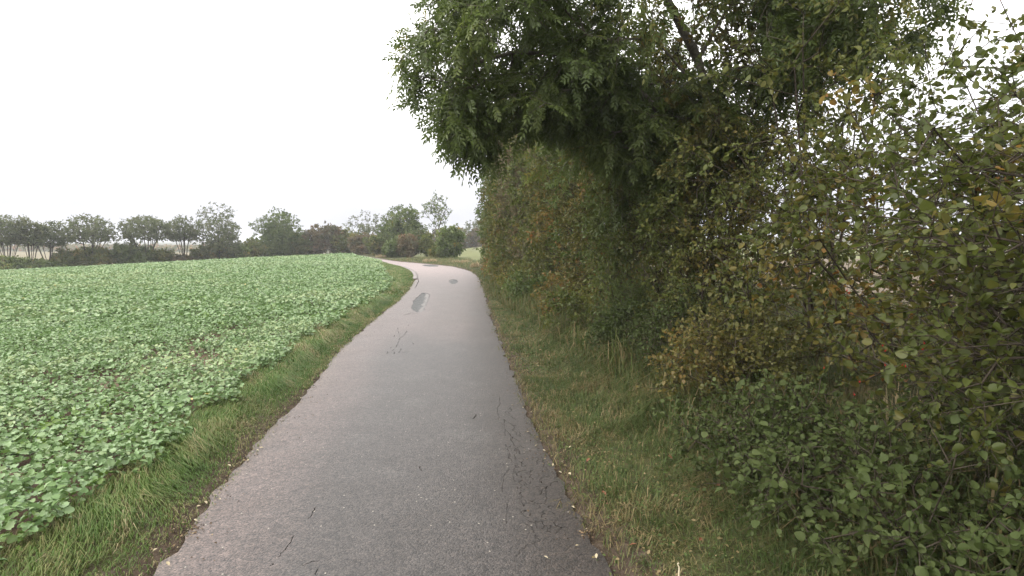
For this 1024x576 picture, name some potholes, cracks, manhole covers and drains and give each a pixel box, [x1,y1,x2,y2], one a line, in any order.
crack [497,398,579,556]
